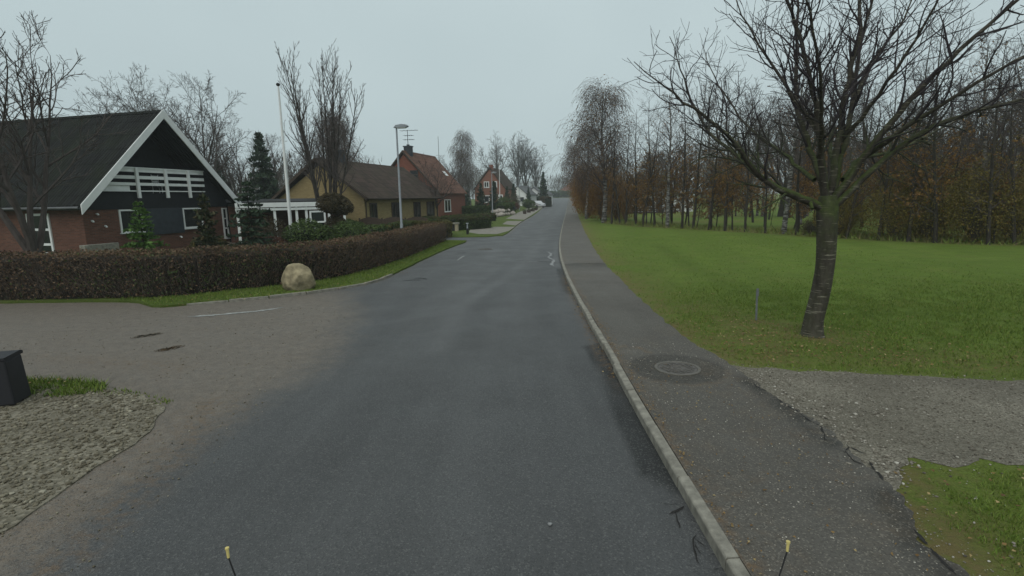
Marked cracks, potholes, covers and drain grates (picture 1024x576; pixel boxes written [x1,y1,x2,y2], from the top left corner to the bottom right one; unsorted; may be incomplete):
manhole cover [654,361,701,376]
crack [659,502,719,569]
crack [754,384,884,480]
